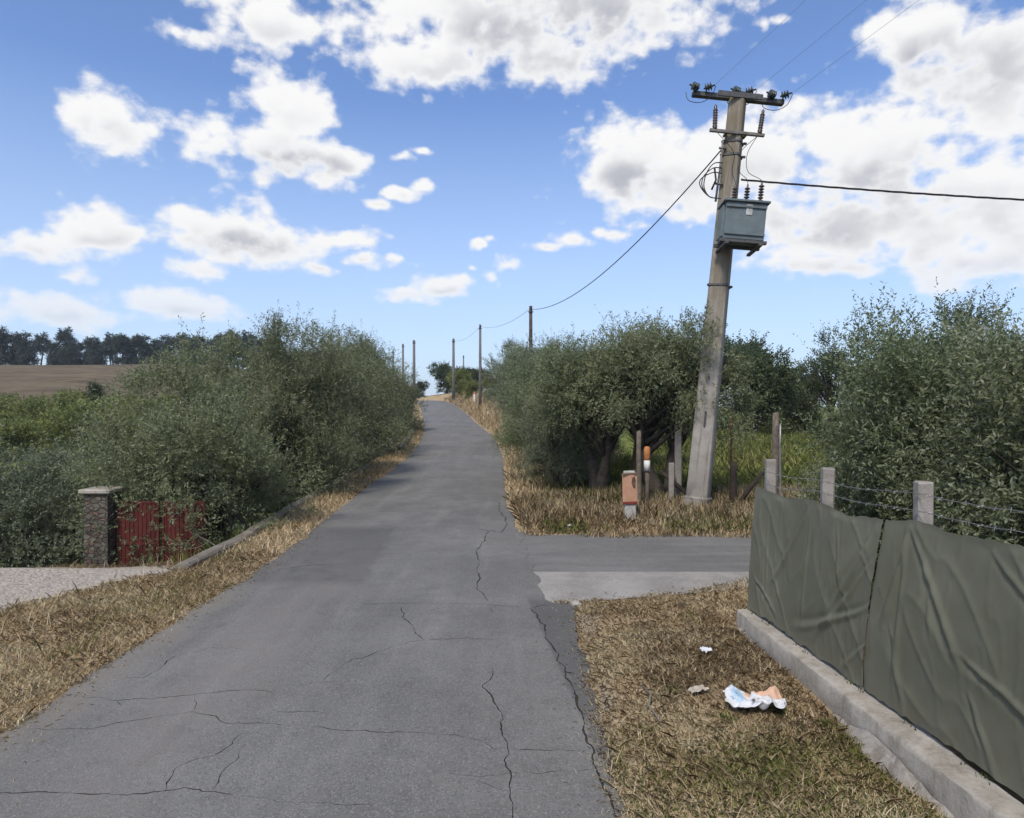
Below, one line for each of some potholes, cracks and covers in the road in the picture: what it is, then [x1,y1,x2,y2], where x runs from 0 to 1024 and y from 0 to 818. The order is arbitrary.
crack [279,503,615,818]
crack [3,690,368,805]
